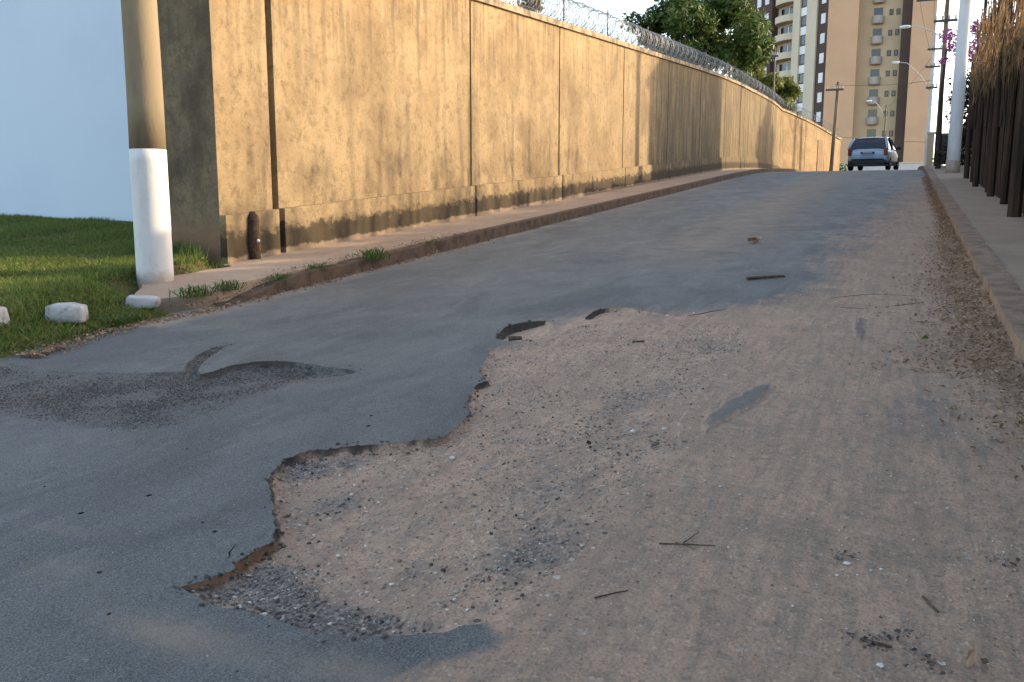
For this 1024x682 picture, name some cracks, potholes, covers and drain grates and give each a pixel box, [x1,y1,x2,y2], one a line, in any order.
pothole [179,320,751,637]
pothole [0,345,358,434]
